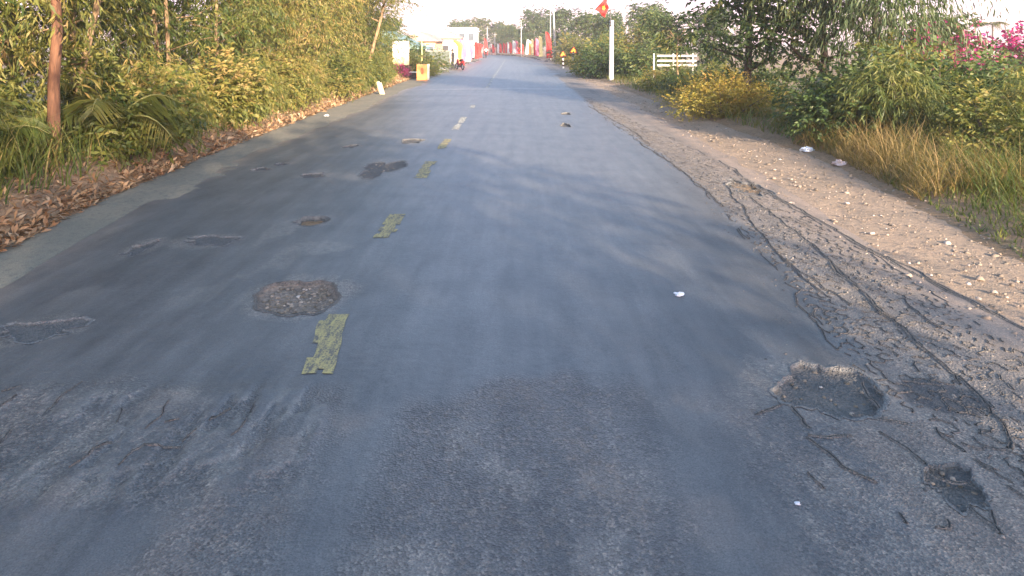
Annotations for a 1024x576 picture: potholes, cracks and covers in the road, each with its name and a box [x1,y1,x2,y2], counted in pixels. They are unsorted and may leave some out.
pothole [769,360,890,421]
pothole [291,215,331,227]
crack [0,381,255,467]
crack [584,97,1024,539]
pothole [921,461,994,516]
pothole [184,234,246,246]
pothole [357,160,409,180]
pothole [0,316,96,344]
pothole [120,238,163,258]
pothole [252,280,342,317]
